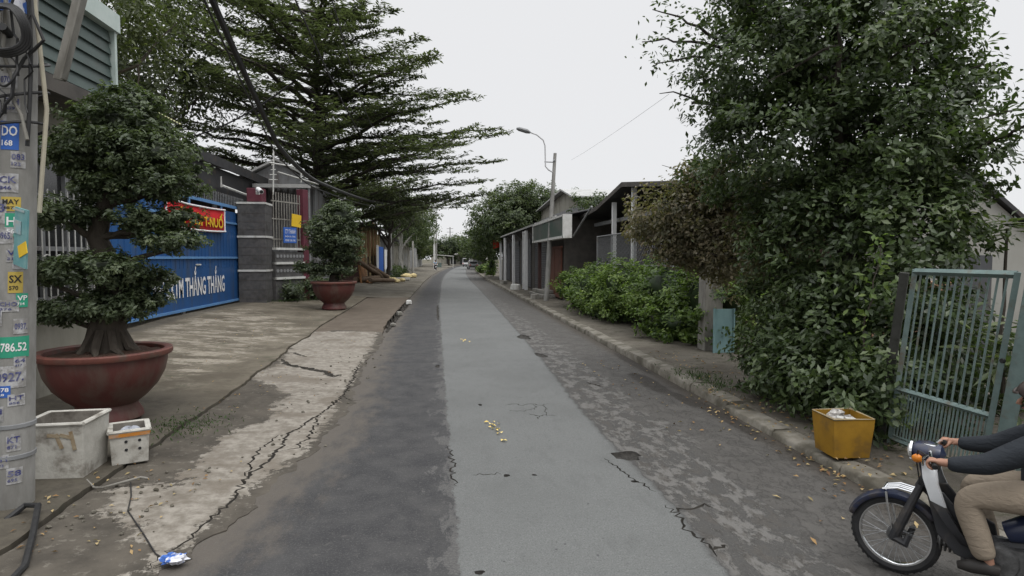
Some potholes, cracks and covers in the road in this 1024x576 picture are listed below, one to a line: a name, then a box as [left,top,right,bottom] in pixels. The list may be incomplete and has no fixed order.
crack [447,446,458,485]
pothole [611,451,641,461]
crack [605,459,725,557]
crack [148,352,362,570]
